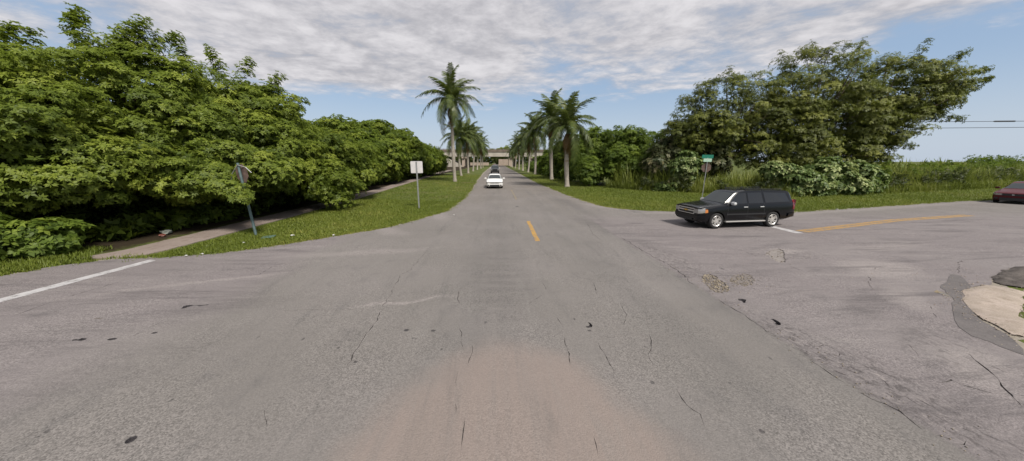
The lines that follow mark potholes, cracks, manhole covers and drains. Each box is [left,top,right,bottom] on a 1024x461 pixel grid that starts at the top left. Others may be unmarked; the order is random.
pothole [730,273,755,286]
pothole [701,274,730,293]
crack [939,356,1019,403]
pothole [766,249,786,263]
